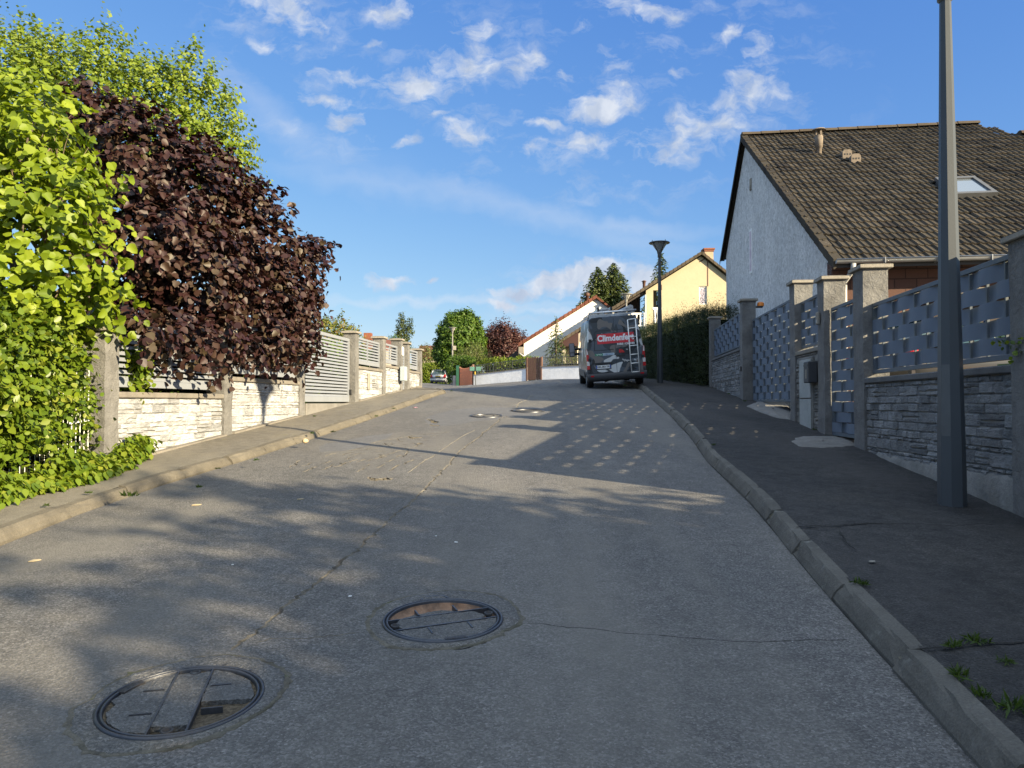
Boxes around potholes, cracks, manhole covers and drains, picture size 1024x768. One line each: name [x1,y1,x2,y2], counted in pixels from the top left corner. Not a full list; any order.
crack [536,623,848,643]
crack [289,430,475,472]
manhole cover [62,654,293,758]
manhole cover [365,589,526,651]
